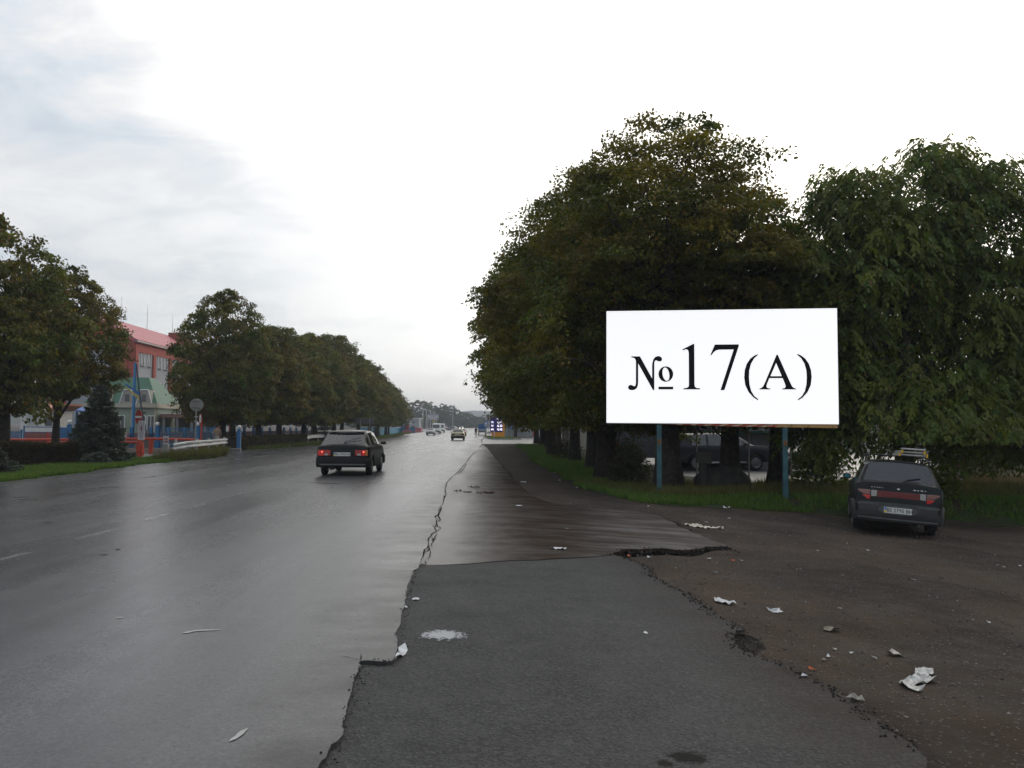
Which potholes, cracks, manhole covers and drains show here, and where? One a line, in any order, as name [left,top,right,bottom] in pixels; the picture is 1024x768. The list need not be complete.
pothole [736,633,766,654]
crack [422,453,474,564]
